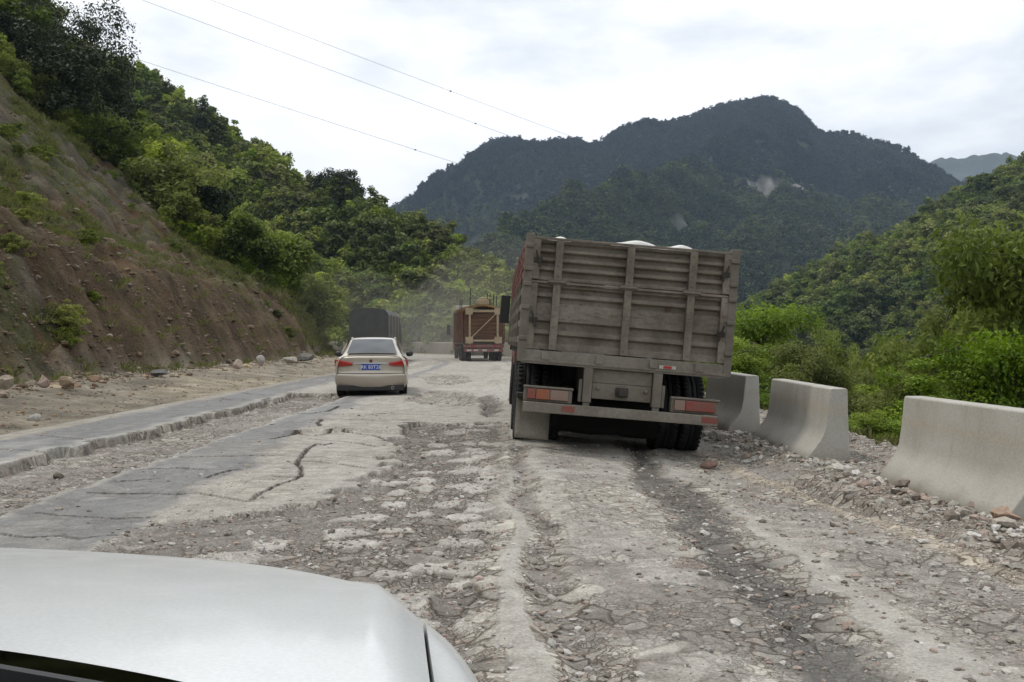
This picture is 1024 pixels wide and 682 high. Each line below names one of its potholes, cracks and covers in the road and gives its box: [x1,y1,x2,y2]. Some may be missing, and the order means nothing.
crack [0,406,458,540]
pothole [475,394,506,417]
